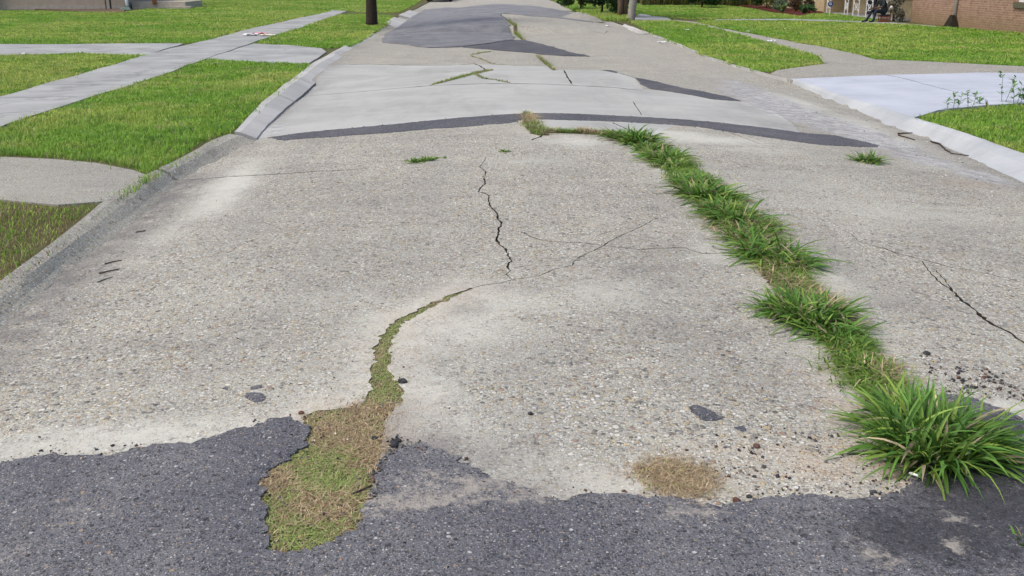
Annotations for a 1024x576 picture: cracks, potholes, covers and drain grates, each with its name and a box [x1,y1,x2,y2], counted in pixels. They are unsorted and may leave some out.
crack [856,238,1024,343]
crack [261,157,726,553]
